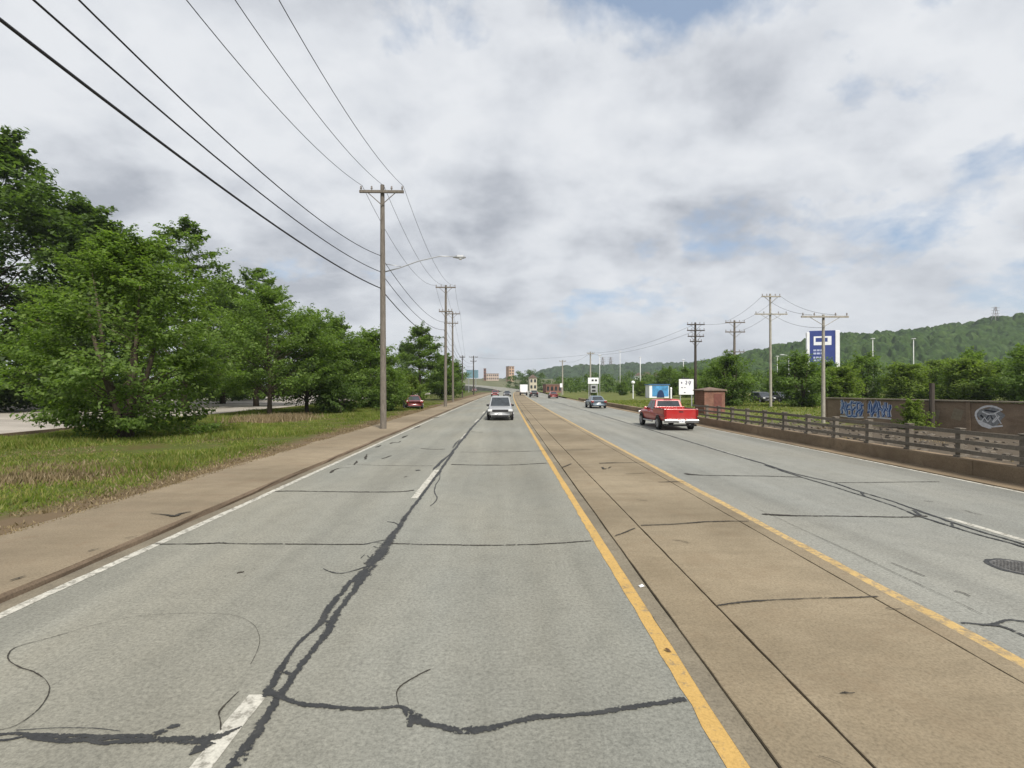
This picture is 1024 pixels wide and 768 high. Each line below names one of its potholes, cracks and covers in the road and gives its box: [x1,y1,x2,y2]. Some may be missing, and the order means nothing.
manhole cover [984,558,1024,575]
crack [0,613,260,730]
crack [330,417,437,473]
